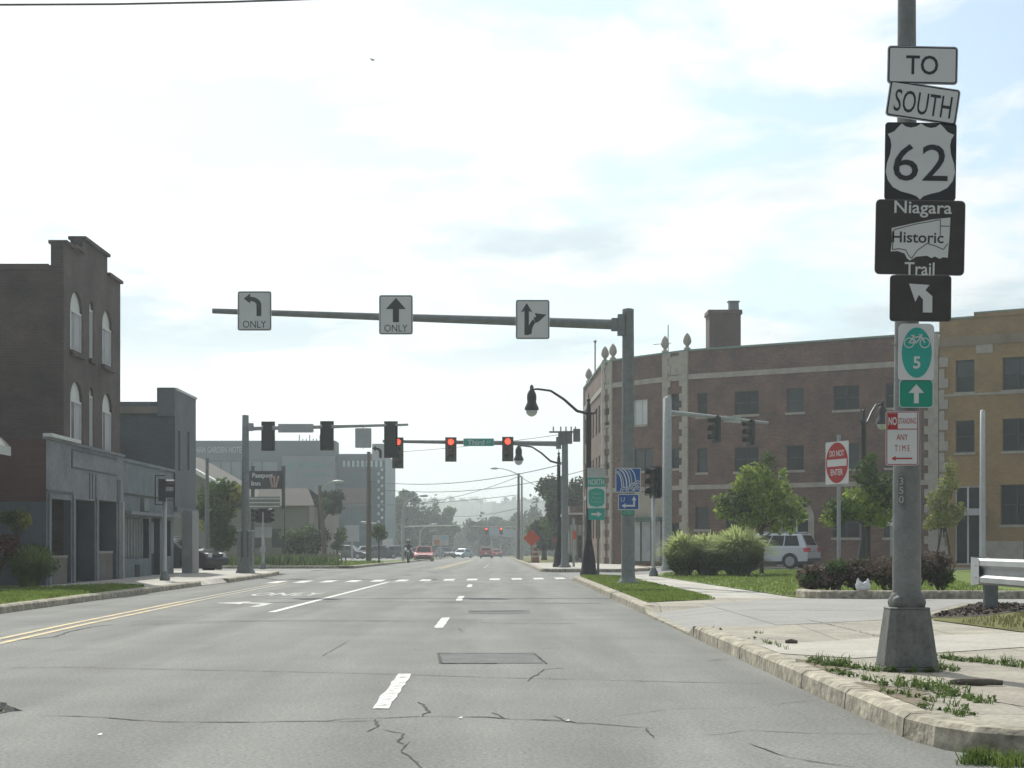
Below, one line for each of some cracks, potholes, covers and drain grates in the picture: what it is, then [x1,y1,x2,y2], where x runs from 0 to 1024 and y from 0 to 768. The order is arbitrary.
crack [43,702,758,768]
pothole [0,702,23,714]
